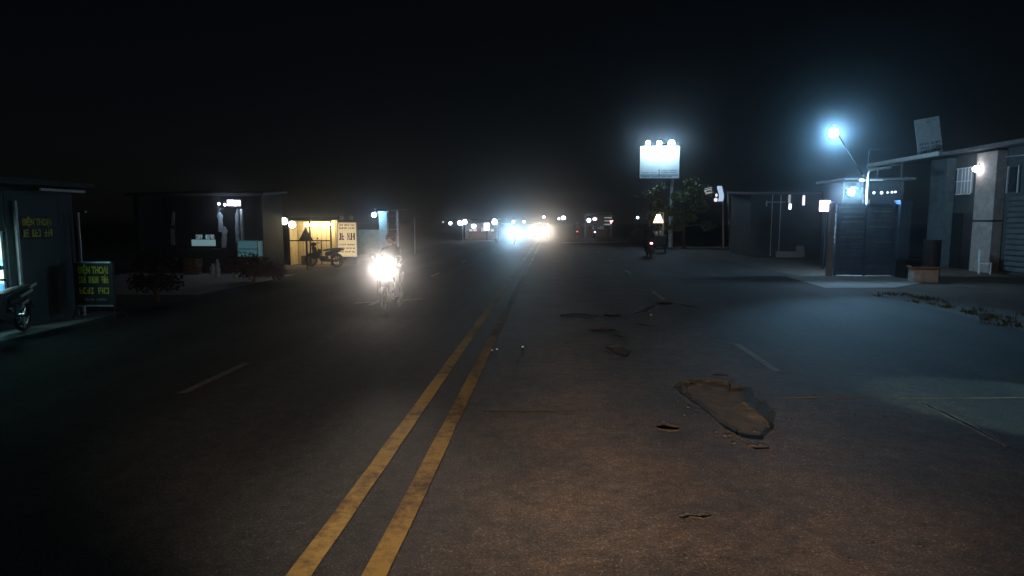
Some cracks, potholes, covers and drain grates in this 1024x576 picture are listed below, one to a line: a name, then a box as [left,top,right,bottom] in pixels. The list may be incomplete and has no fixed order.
crack [628,305,659,327]
pothole [600,345,639,358]
pothole [650,420,684,432]
pothole [668,377,786,444]
